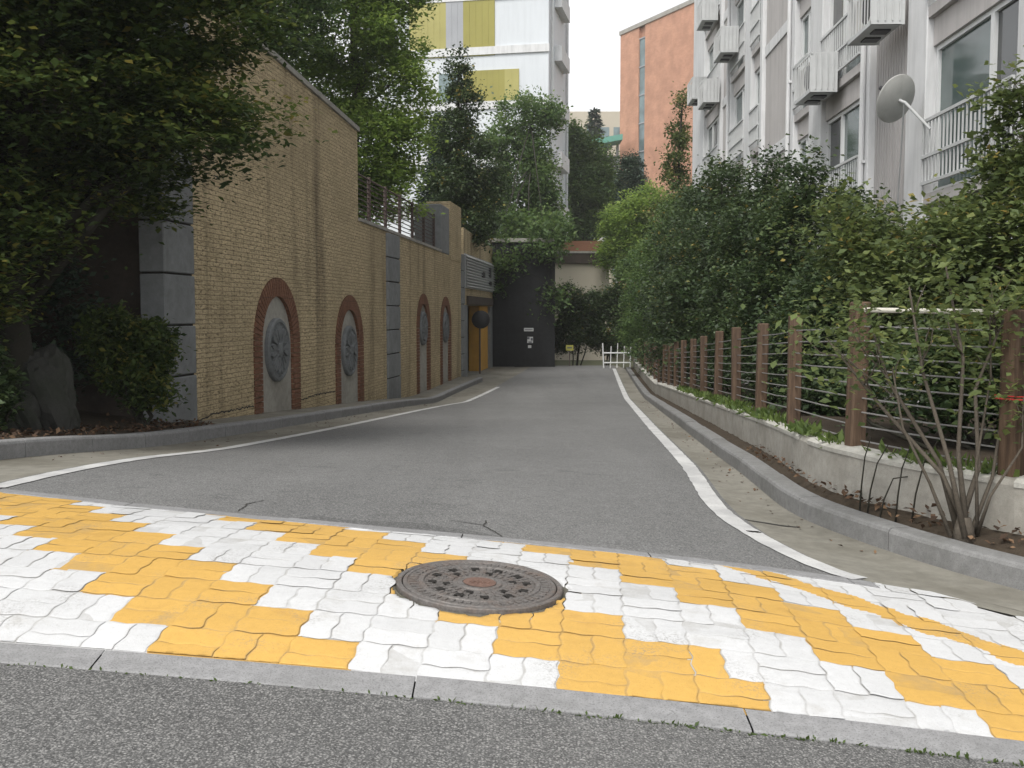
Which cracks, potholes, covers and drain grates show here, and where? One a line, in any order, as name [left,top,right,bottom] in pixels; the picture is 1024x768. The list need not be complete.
manhole cover [389,560,575,620]
